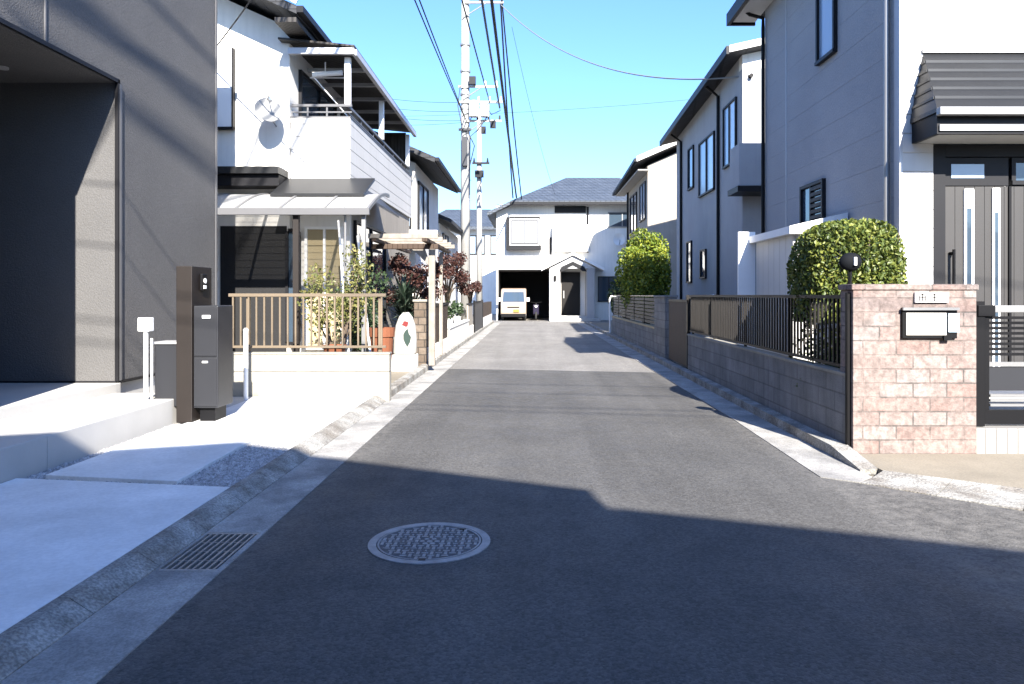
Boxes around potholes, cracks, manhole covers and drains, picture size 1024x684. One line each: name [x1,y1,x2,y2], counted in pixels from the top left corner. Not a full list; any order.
drain grate [159,533,258,570]
manhole cover [368,522,490,565]
